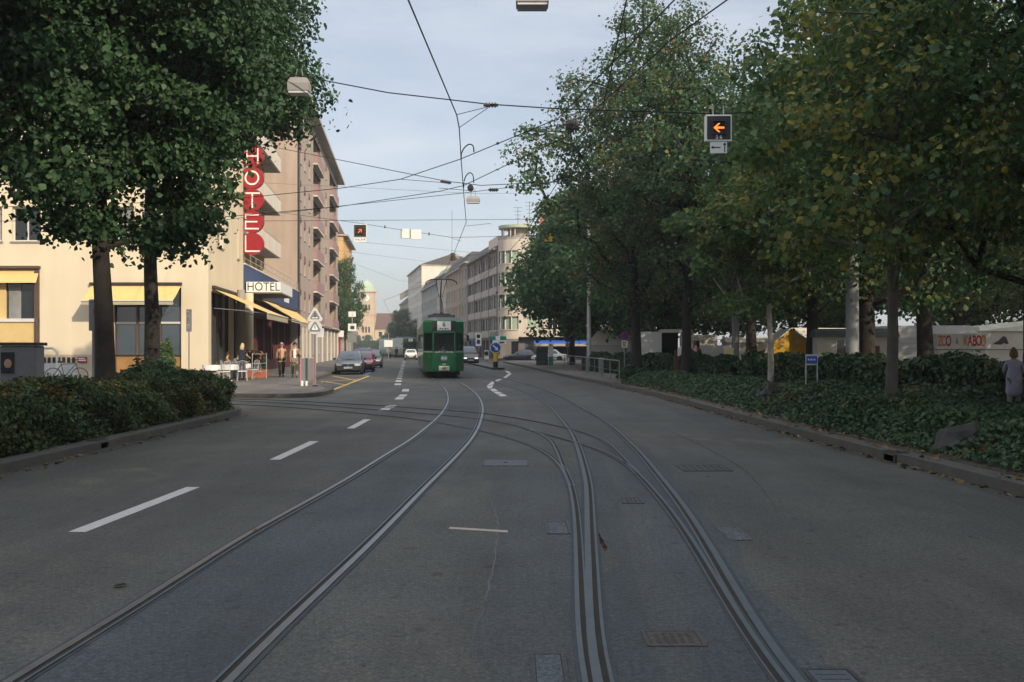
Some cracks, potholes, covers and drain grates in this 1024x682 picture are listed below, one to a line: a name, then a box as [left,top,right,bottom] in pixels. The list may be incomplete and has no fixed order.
manhole cover [715,526,753,541]
drain grate [882,450,908,463]
manhole cover [530,652,570,682]
crack [471,497,499,642]
manhole cover [544,521,572,534]
